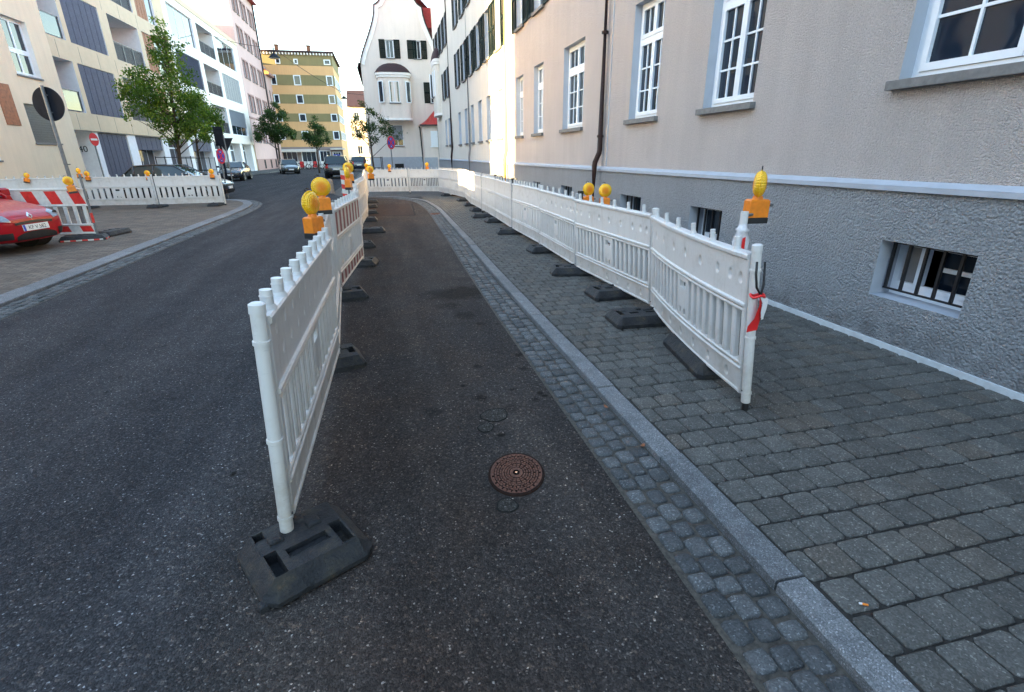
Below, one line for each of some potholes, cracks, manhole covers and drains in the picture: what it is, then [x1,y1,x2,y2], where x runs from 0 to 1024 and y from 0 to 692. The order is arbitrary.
manhole cover [488,453,545,497]
